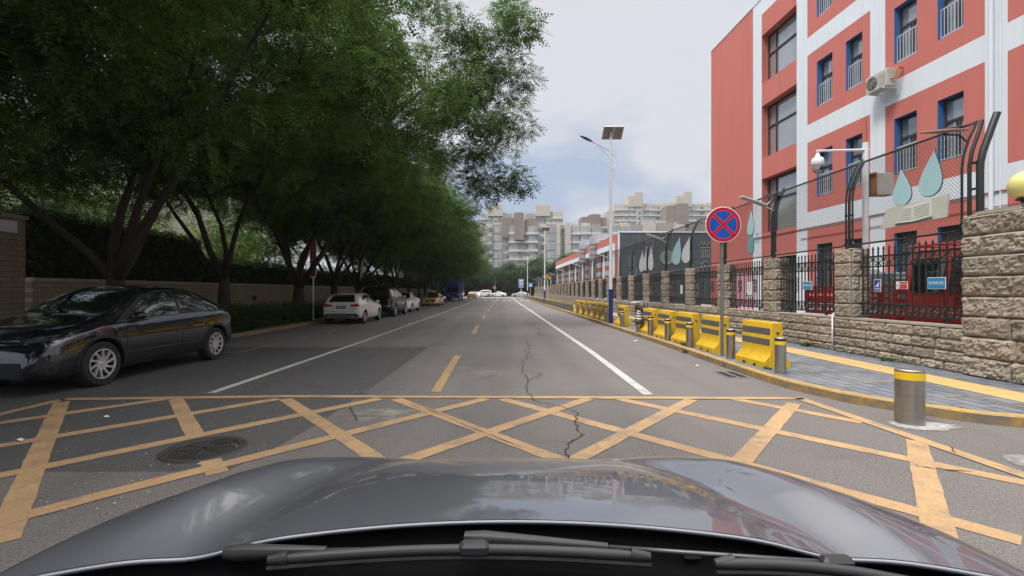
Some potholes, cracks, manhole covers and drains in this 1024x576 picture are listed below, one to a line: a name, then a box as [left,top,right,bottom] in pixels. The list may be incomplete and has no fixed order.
manhole cover [156,436,248,463]
crack [521,345,583,458]
